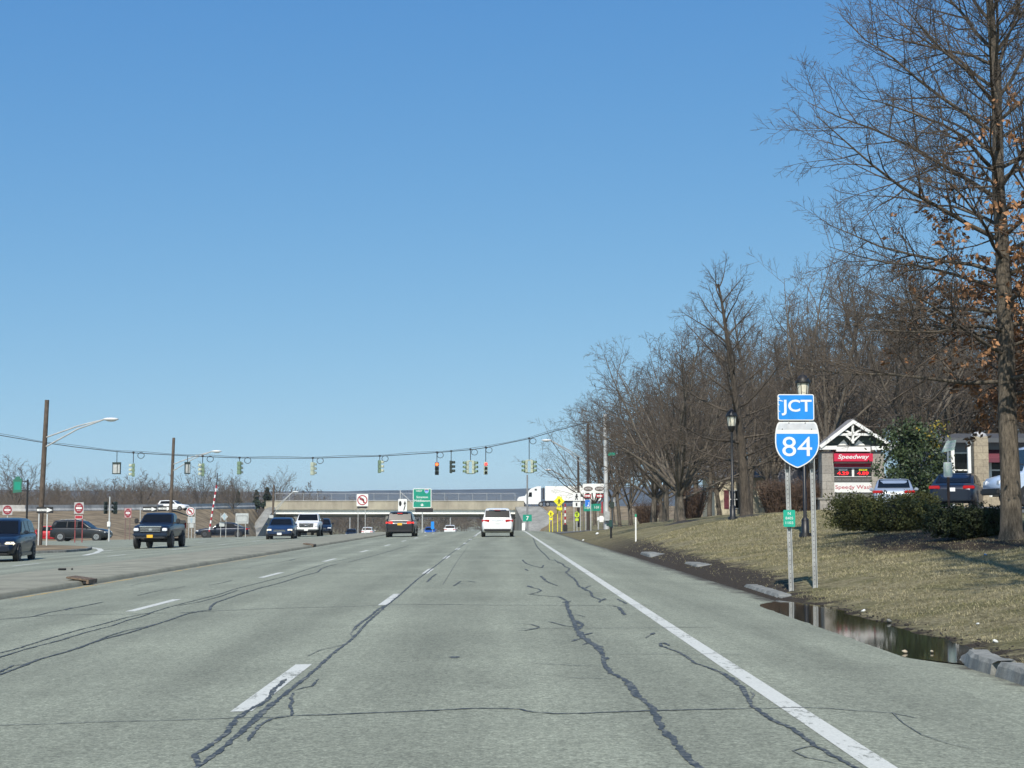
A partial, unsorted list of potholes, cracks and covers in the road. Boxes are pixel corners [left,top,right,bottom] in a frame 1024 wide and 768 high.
crack [15,539,916,768]
